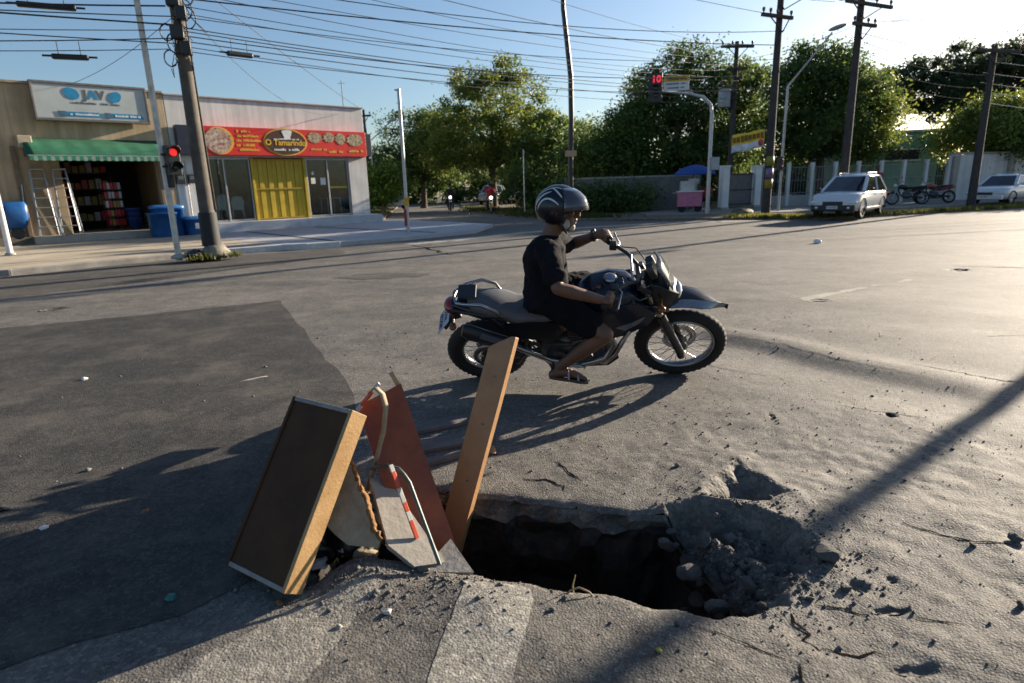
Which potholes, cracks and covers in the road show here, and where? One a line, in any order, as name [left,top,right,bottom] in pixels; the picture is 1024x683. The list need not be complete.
crack [904,523,1019,547]
pothole [304,492,761,620]
crack [527,461,581,490]
crack [689,604,887,683]
pothole [665,497,825,619]
